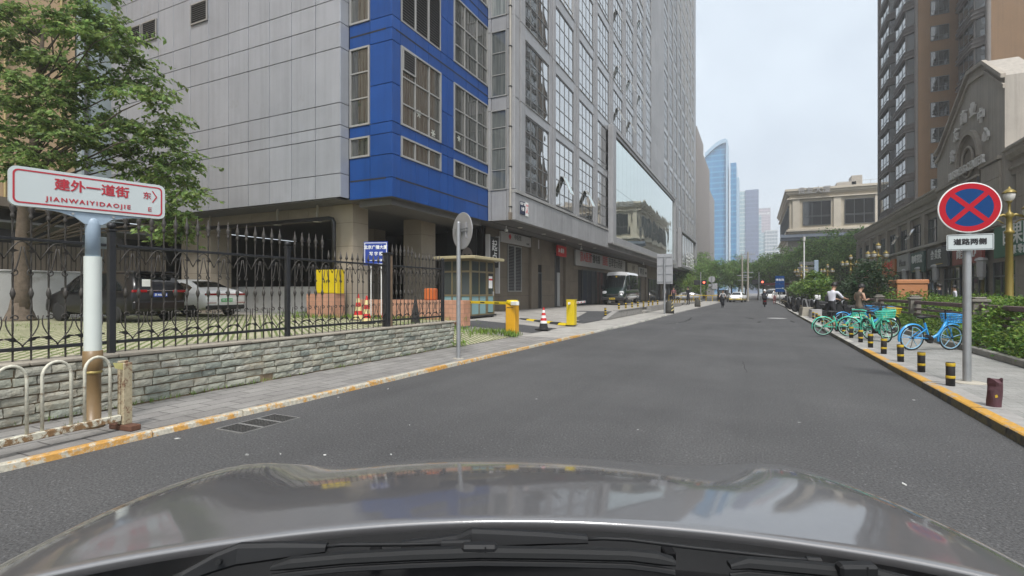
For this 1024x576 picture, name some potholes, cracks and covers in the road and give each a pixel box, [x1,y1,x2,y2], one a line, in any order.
drain grate [215,414,300,434]
